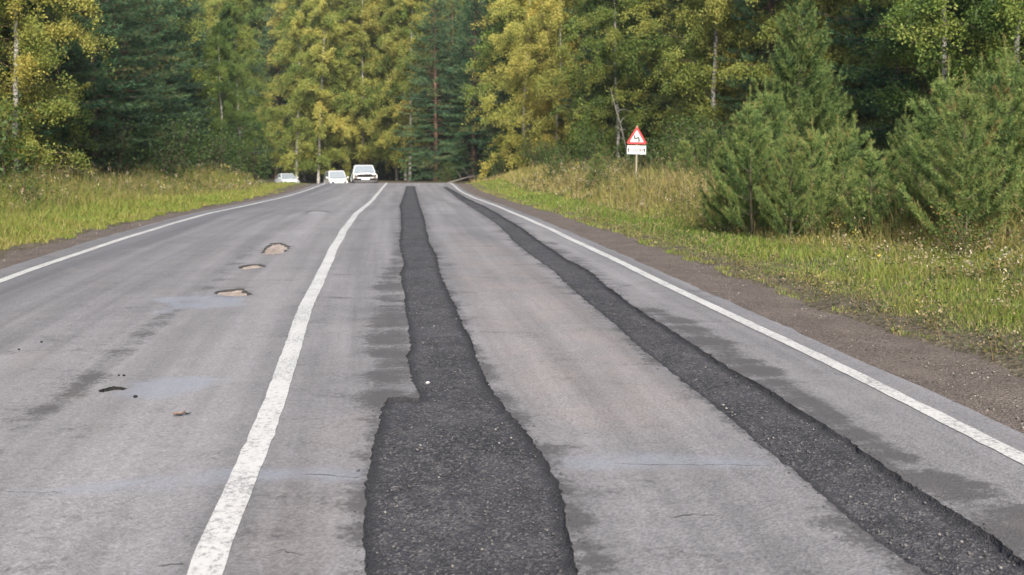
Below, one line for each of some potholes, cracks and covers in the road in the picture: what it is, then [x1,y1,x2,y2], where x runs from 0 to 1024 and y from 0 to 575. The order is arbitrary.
pothole [260,243,291,255]
pothole [214,288,252,296]
